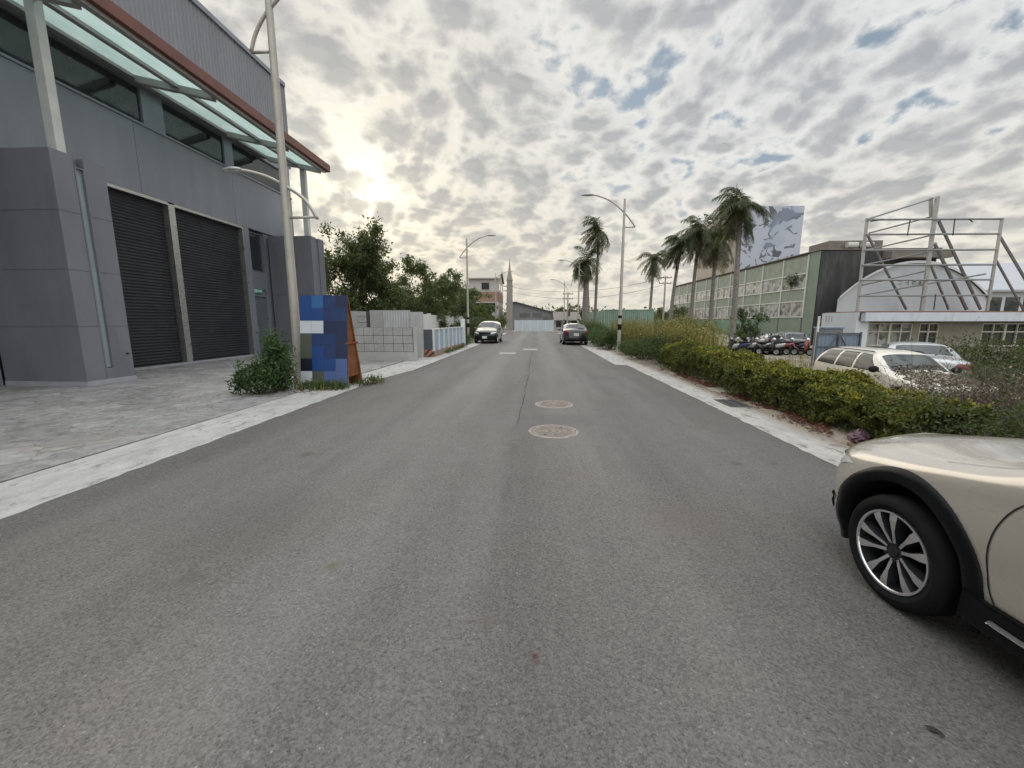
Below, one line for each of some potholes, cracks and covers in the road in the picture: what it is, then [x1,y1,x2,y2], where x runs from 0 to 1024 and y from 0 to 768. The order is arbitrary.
drain grate [714,399,752,407]
manhole cover [535,400,573,408]
manhole cover [528,425,579,439]
